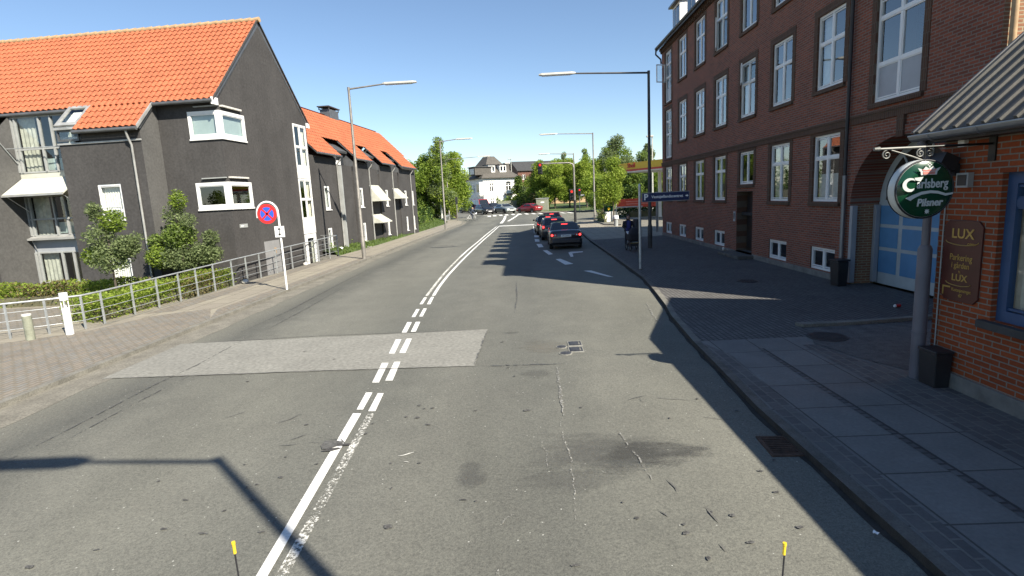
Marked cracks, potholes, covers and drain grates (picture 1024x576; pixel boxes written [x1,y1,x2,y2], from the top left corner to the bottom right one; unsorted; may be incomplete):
manhole cover [807,332,849,341]
drain grate [756,436,805,457]
